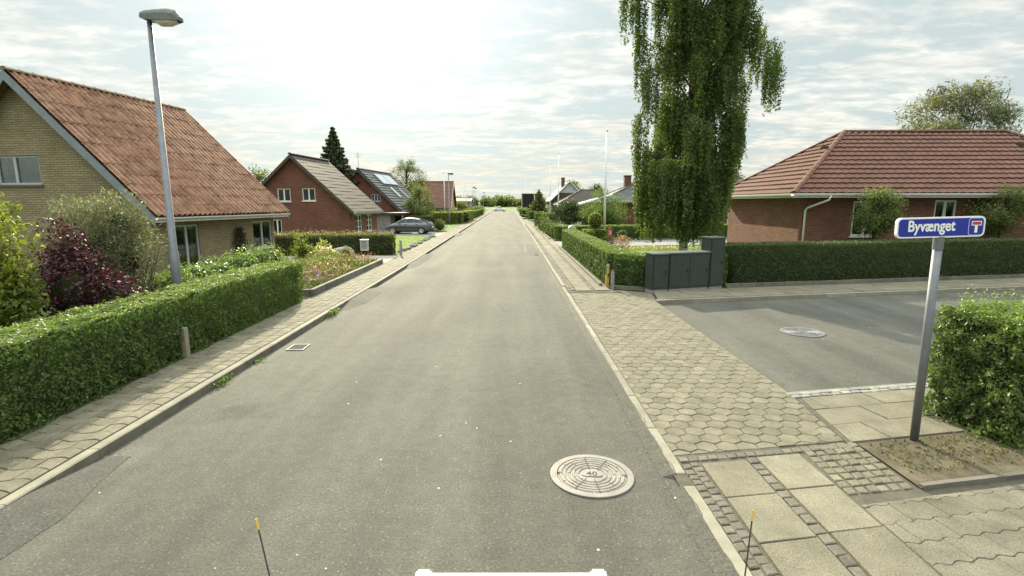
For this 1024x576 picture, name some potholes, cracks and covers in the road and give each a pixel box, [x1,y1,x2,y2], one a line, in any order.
manhole cover [550,454,634,498]
manhole cover [780,327,826,337]
